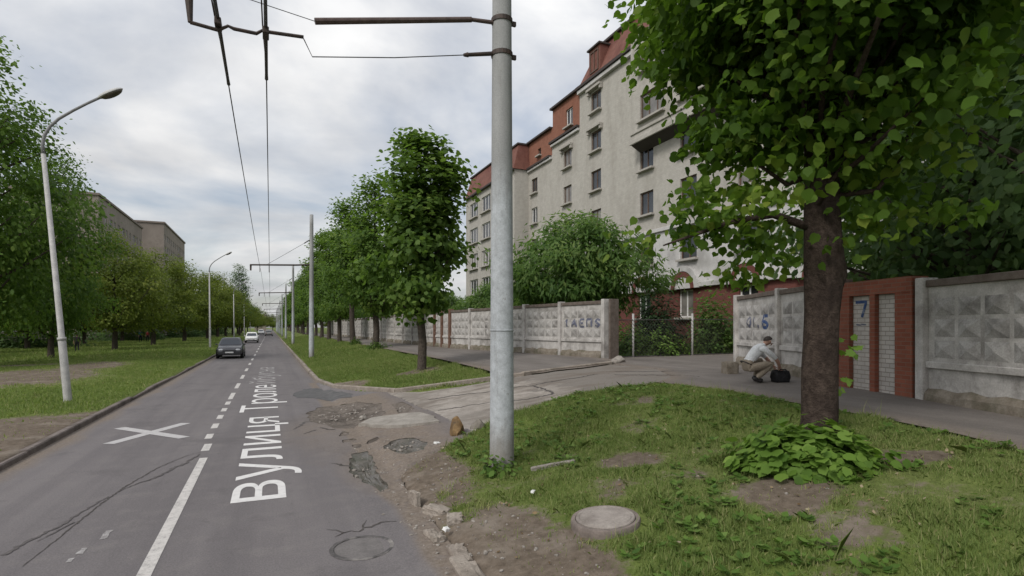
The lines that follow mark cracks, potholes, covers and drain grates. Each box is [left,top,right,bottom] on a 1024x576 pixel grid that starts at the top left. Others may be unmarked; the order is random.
manhole cover [329,535,394,561]
pothole [306,402,386,429]
crack [329,521,390,537]
crack [1,452,200,566]
manhole cover [571,505,641,540]
pothole [383,438,427,454]
pothole [349,451,388,492]
